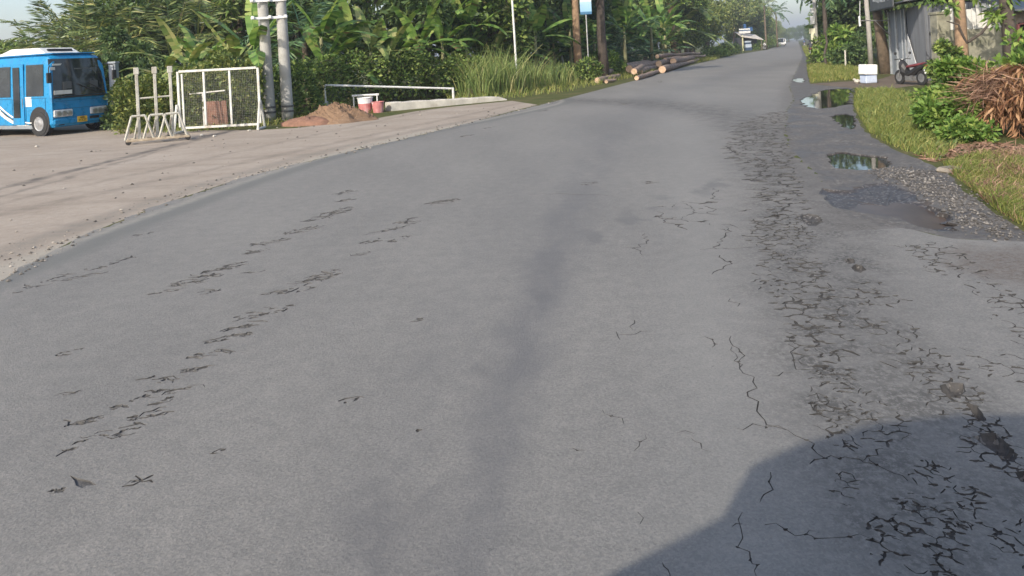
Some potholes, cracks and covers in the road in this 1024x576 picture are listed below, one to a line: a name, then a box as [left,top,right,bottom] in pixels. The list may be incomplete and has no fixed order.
pothole [940,382,966,399]
pothole [818,182,959,232]
crack [56,190,460,457]
crack [572,411,711,452]
pothole [799,88,855,109]
pothole [826,152,892,170]
pothole [972,433,1018,462]
crack [627,111,1024,576]
crack [13,232,151,293]
pothole [967,403,986,421]
pothole [829,114,858,130]
crack [122,475,153,487]
